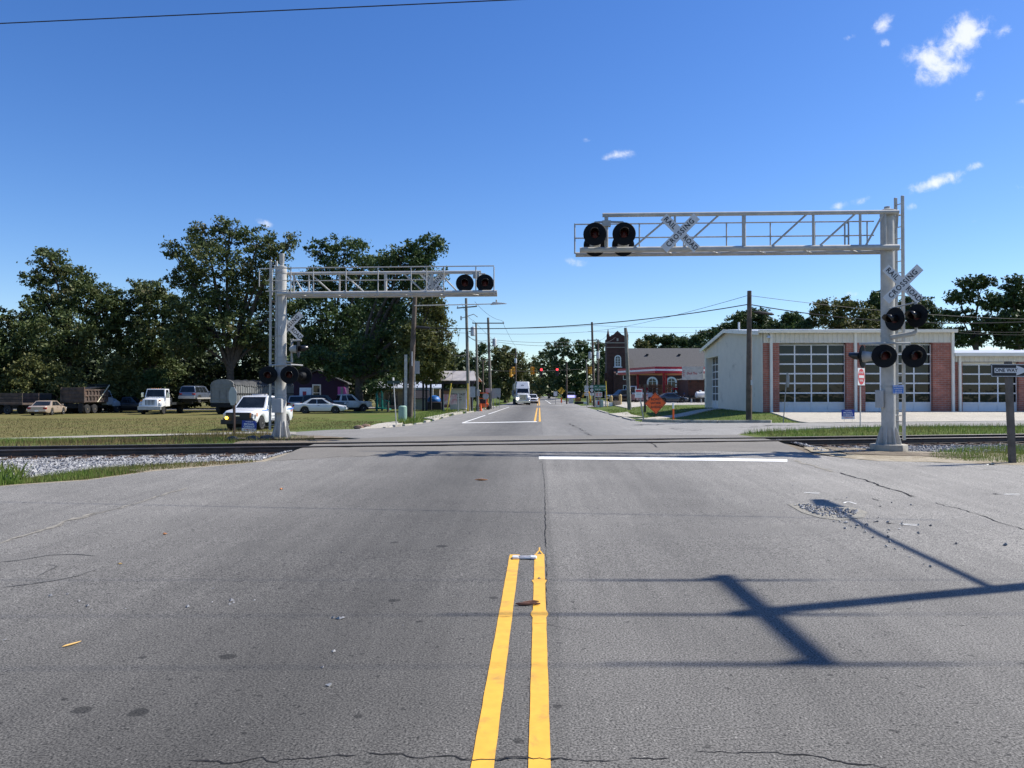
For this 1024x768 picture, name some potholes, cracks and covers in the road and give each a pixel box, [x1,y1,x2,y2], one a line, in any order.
crack [0,488,186,543]
crack [194,751,886,768]
crack [794,460,1022,529]
